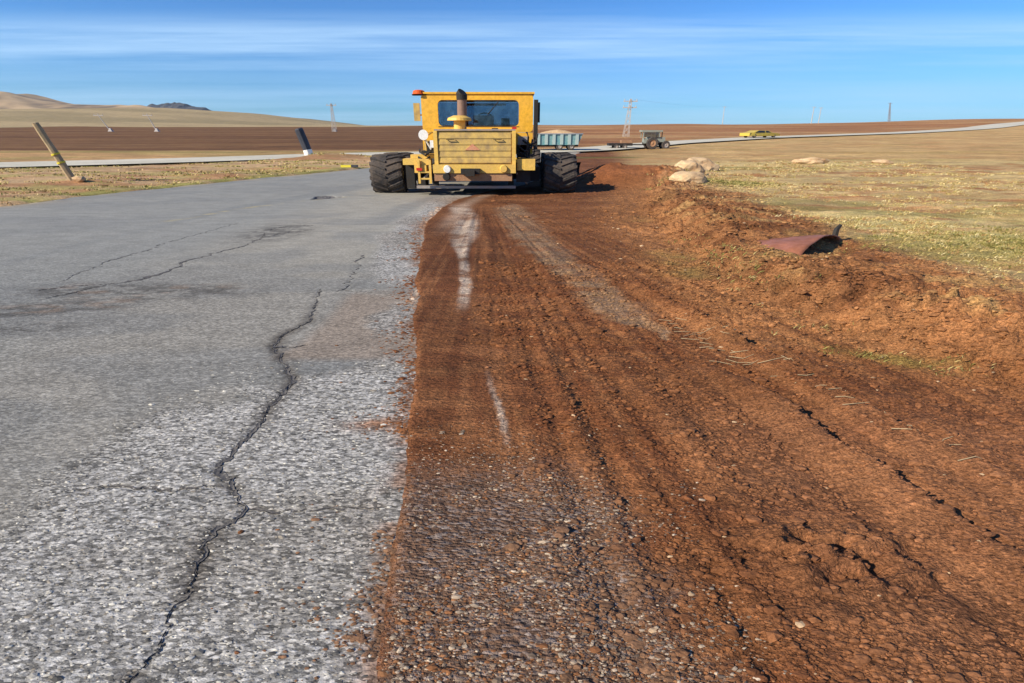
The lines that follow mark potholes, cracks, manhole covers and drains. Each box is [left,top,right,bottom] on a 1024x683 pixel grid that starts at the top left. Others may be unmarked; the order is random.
crack [71,290,381,683]
crack [39,225,315,299]
crack [337,255,384,292]
